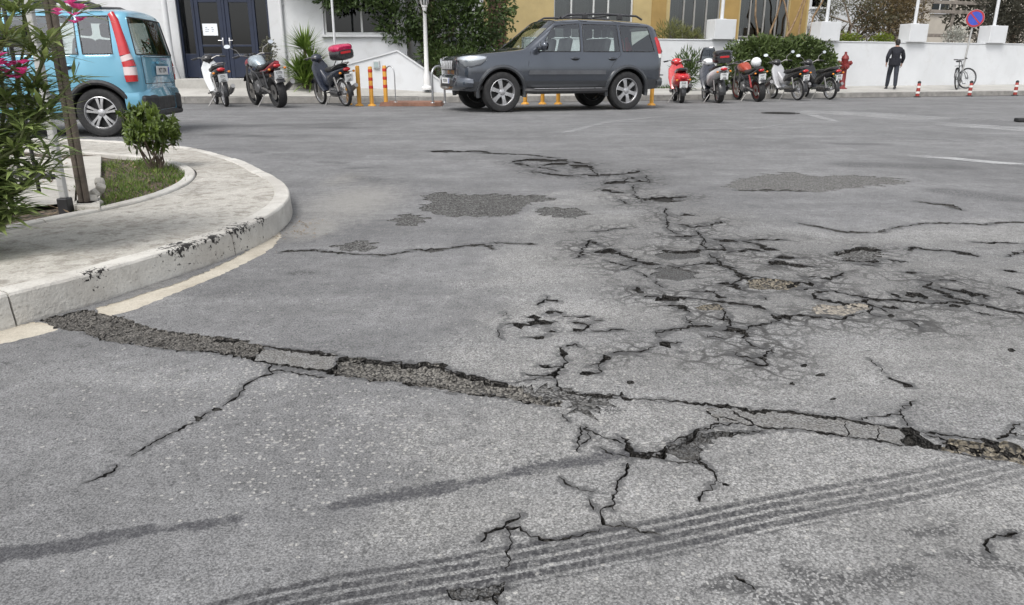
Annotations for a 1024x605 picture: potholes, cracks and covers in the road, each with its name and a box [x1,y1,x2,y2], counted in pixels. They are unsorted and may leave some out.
crack [82,208,1024,605]
pothole [747,278,799,290]
pothole [39,309,265,358]
pothole [900,427,942,451]
pothole [811,303,870,316]
crack [431,150,686,204]
crack [739,189,962,210]
pothole [940,438,1024,466]
pothole [666,430,751,463]
